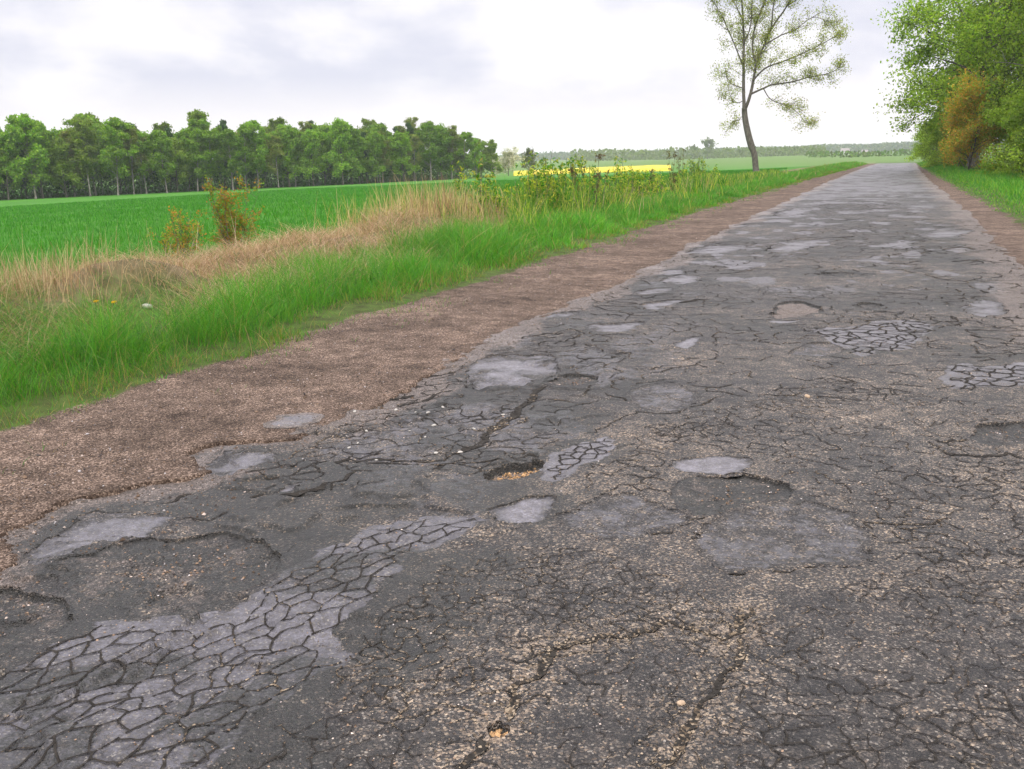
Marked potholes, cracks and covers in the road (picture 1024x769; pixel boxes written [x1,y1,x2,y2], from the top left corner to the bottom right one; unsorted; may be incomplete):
pothole [481,458,547,482]
pothole [765,300,827,320]
crack [247,200,1024,575]
pothole [483,719,514,744]
pothole [666,472,797,518]
crack [0,518,1024,769]
pothole [44,531,284,626]
